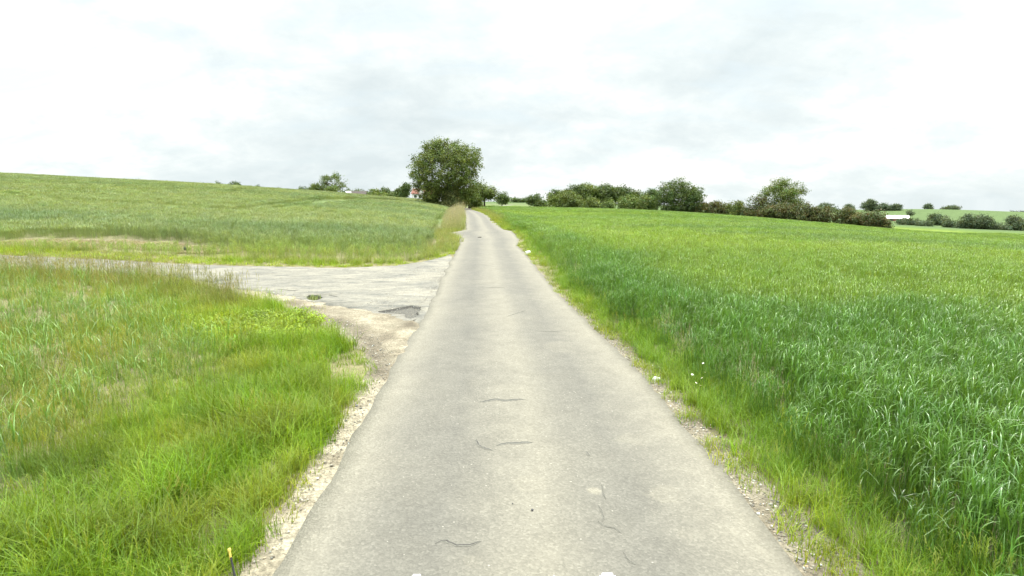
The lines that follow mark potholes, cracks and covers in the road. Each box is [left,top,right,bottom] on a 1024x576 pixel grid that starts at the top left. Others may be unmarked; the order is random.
crack [598,484,622,534]
crack [475,439,532,450]
crack [435,539,481,547]
pothole [378,306,421,319]
